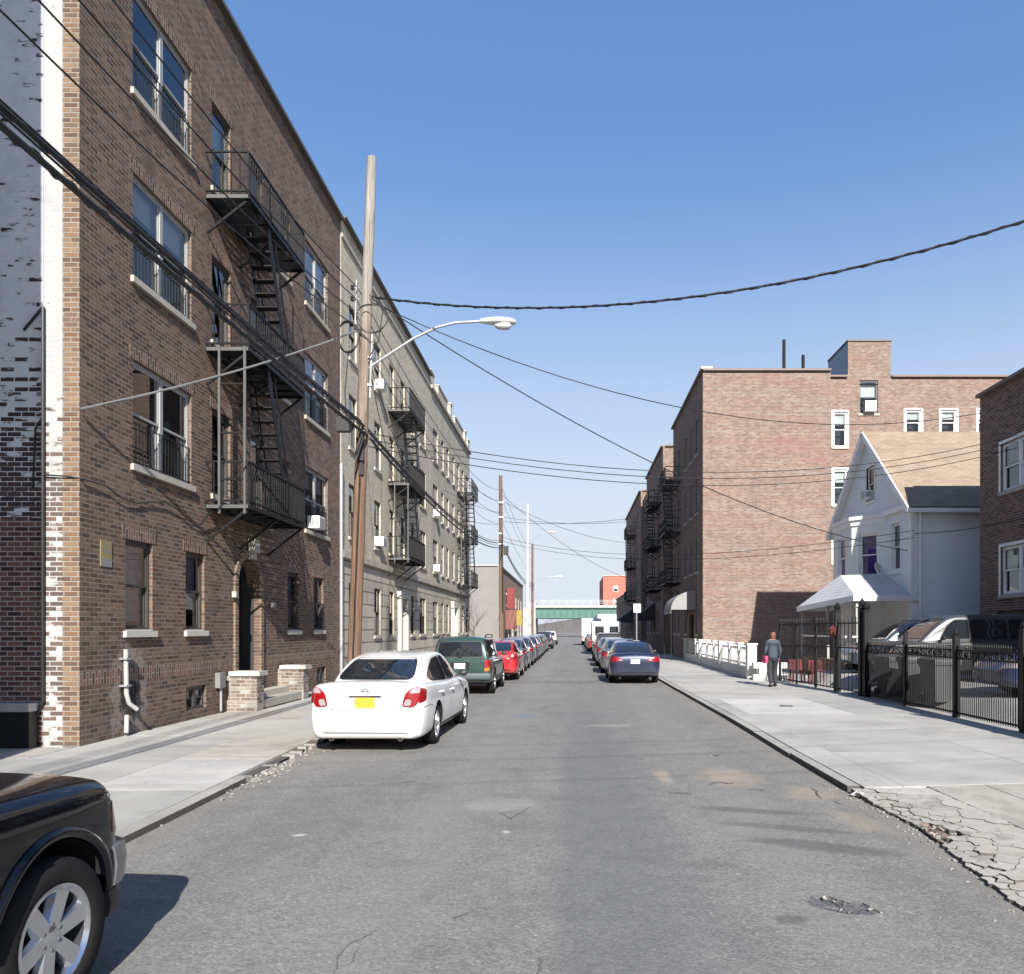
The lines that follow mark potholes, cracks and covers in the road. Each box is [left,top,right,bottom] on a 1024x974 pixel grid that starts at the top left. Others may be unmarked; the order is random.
crack [882,808,1009,887]
crack [333,928,381,974]
pothole [801,895,885,915]
